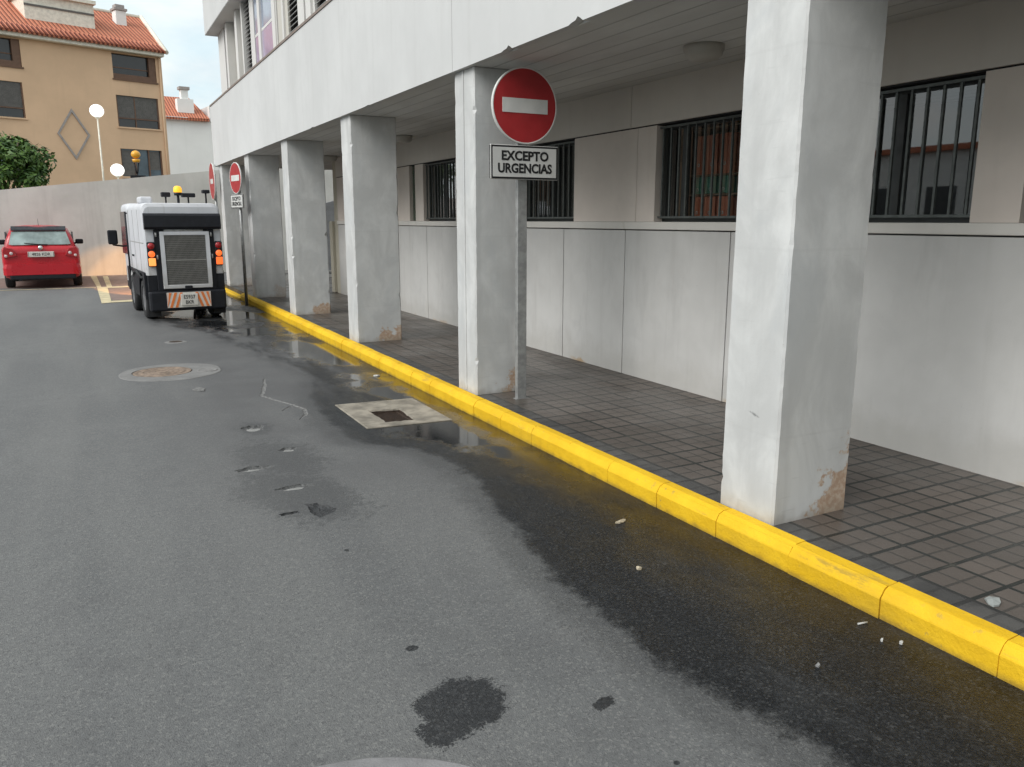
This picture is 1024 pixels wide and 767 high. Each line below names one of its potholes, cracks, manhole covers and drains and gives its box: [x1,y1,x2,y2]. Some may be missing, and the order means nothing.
crack [259,379,308,419]
drain grate [335,398,452,429]
manhole cover [119,363,221,382]
pothole [305,503,336,518]
pothole [275,483,315,491]
